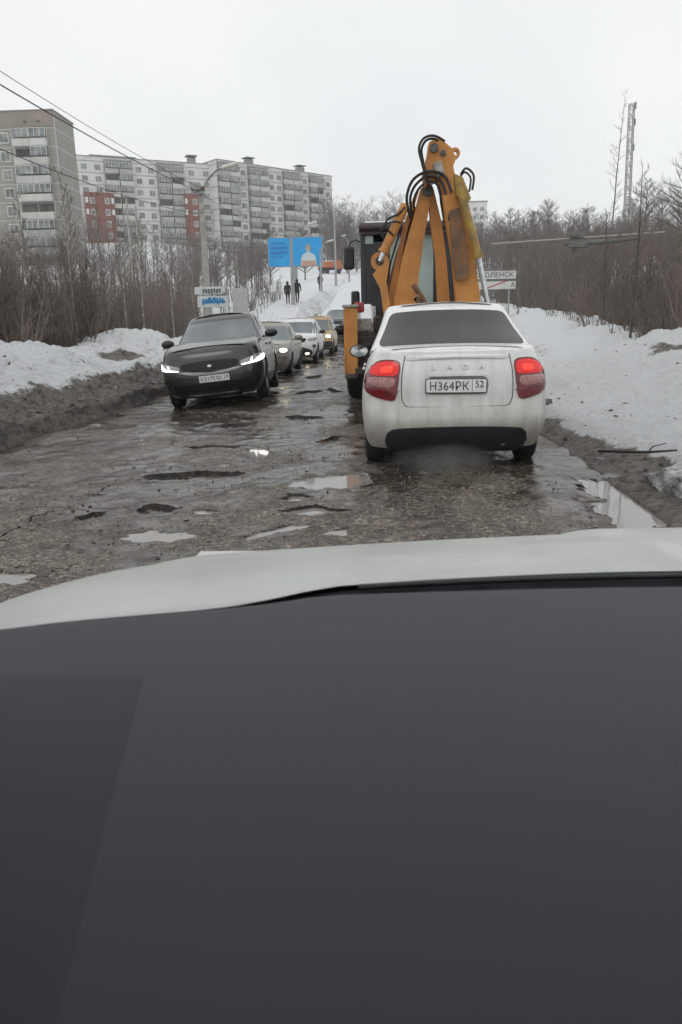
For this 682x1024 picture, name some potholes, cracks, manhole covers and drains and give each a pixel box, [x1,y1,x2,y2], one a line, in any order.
pothole [124,468,254,483]
pothole [226,519,328,543]
pothole [309,434,351,445]
pothole [125,501,192,518]
pothole [237,446,281,463]
pothole [562,475,682,529]
pothole [0,564,54,589]
pothole [108,528,210,546]
pothole [265,471,381,492]
pothole [61,509,117,524]
crack [0,508,62,541]
pothole [267,501,364,519]
